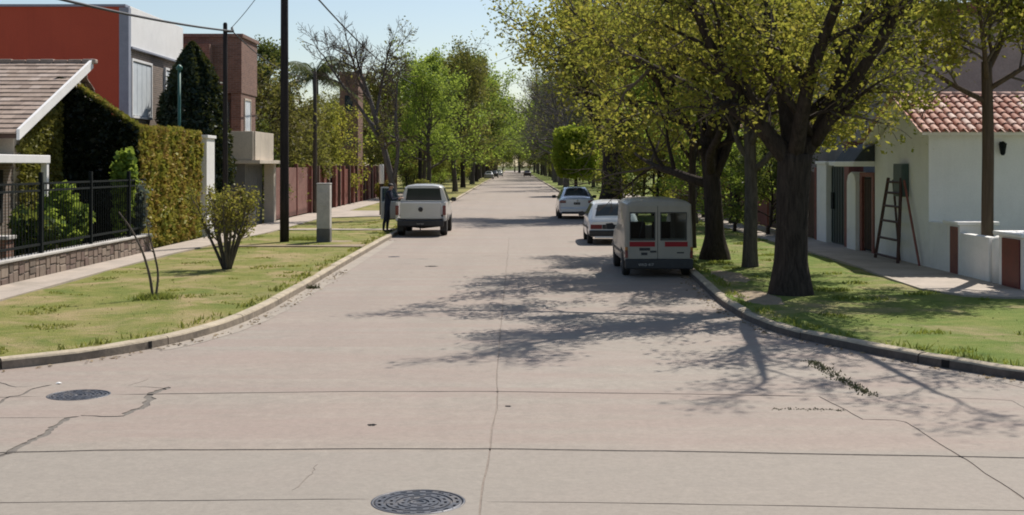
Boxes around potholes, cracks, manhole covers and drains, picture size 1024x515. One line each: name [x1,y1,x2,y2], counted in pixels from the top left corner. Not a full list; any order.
manhole cover [371,489,466,515]
crack [0,380,170,457]
manhole cover [46,389,111,401]
